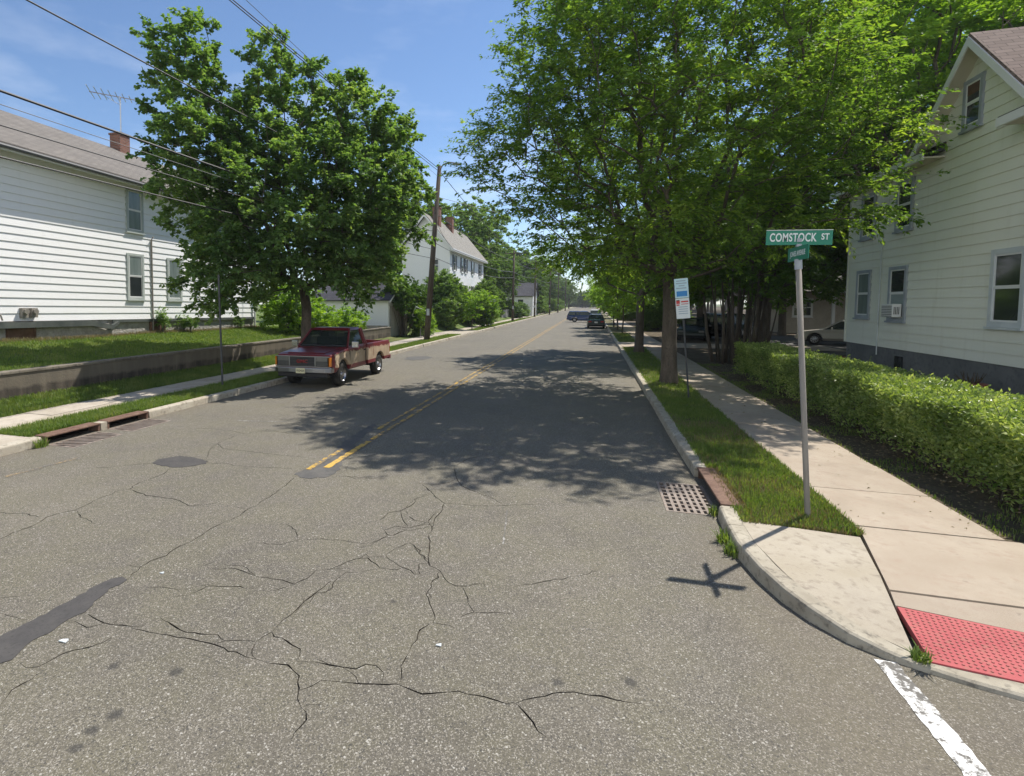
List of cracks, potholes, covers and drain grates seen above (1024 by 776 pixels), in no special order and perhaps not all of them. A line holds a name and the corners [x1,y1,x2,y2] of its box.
crack [0,457,641,743]
drain grate [49,432,122,448]
drain grate [110,419,171,432]
drain grate [656,481,718,517]
